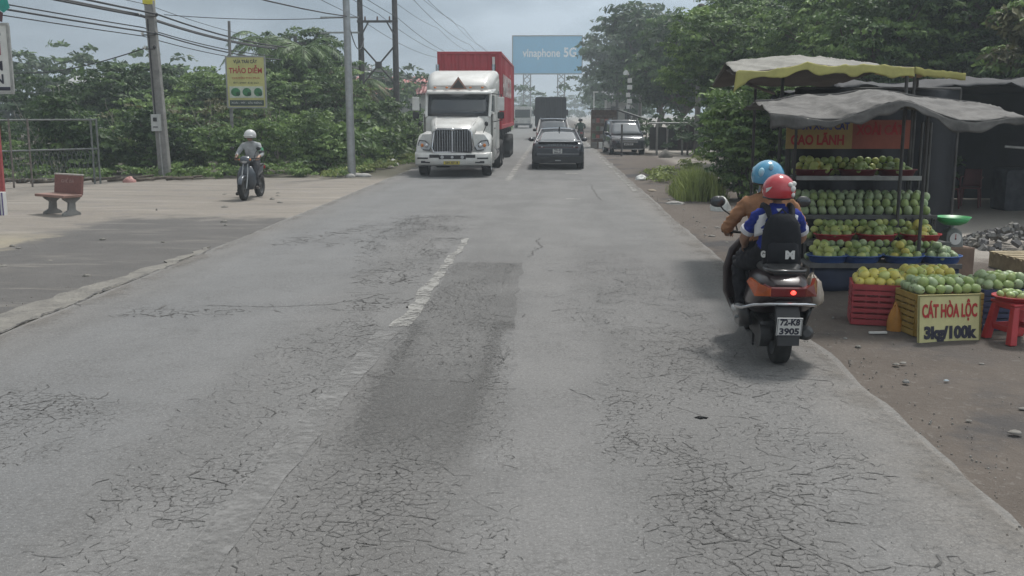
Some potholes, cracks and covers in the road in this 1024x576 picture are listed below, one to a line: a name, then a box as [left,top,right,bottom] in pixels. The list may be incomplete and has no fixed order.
crack [522,238,720,335]
crack [571,325,997,576]
crack [11,215,537,576]
